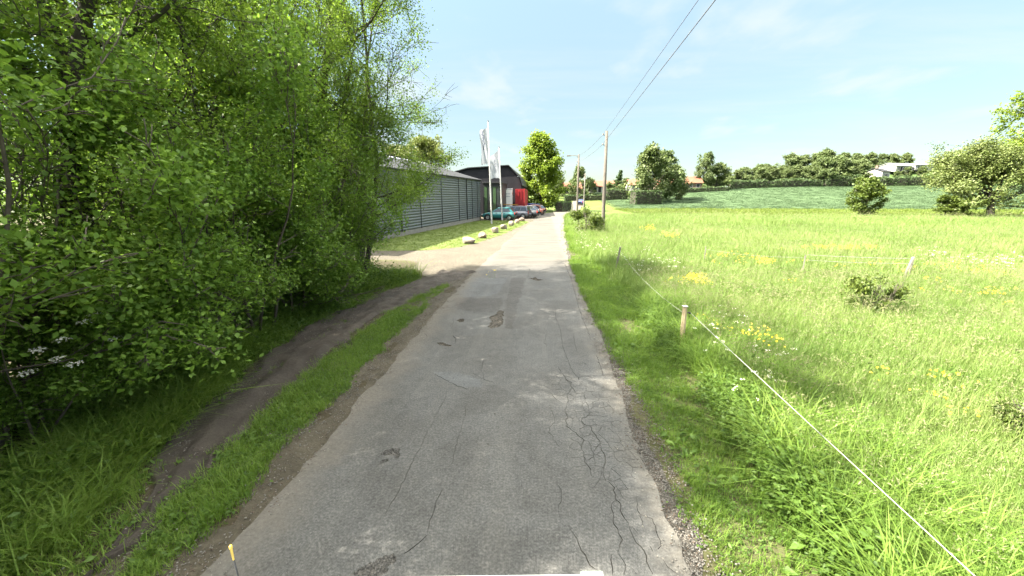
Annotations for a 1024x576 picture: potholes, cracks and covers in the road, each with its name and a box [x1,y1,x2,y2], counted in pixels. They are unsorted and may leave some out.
crack [544,310,677,576]
pothole [488,310,504,329]
pothole [380,448,401,459]
crack [404,407,466,554]
